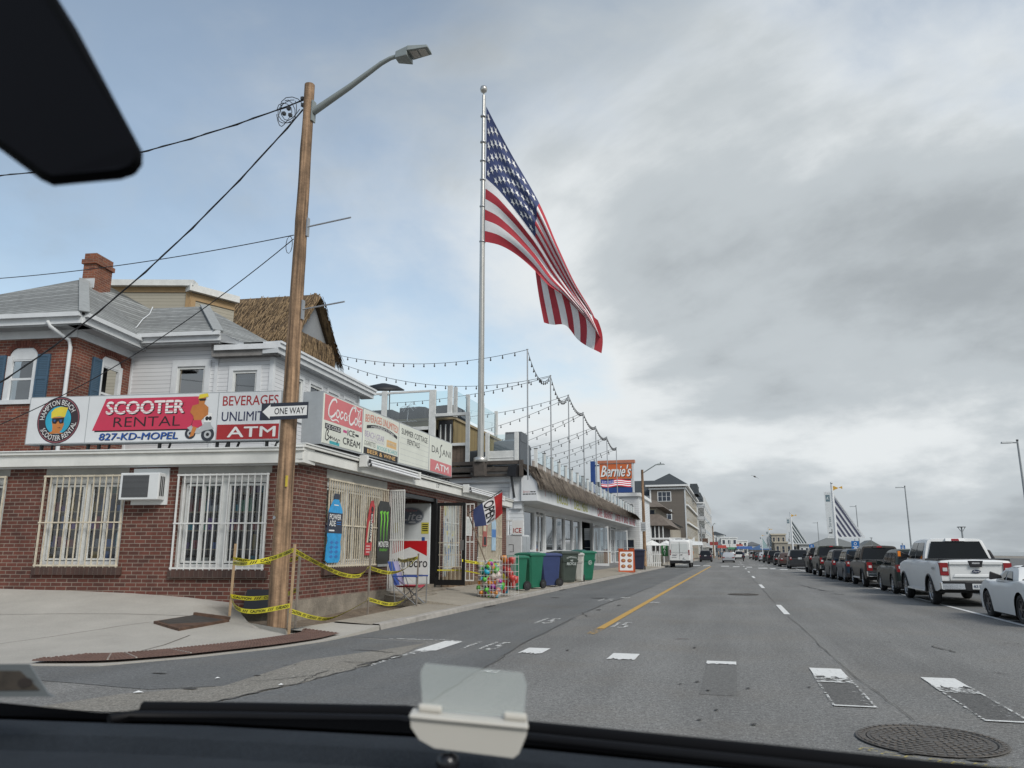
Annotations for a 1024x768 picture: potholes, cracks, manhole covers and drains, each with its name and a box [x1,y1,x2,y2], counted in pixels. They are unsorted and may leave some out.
crack [214,649,403,702]
manhole cover [855,724,1011,758]
crack [789,617,918,725]
